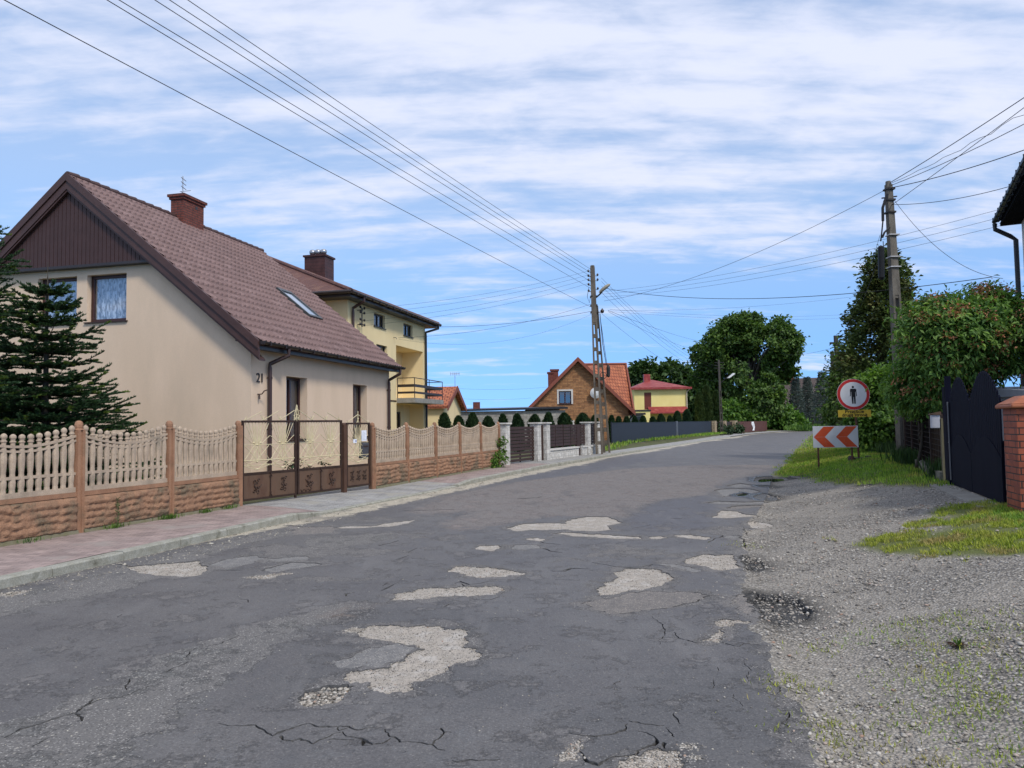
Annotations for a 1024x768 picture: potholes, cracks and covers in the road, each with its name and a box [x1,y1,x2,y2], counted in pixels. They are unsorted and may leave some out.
crack [586,595,759,707]
pothole [343,624,484,694]
crack [218,723,500,763]
pothole [737,555,771,571]
crack [4,636,281,747]
pothole [754,493,778,501]
pothole [743,593,814,624]
pothole [297,684,354,707]
pothole [126,560,209,577]
pothole [507,516,623,531]
pothole [447,566,526,578]
crack [569,713,680,766]
